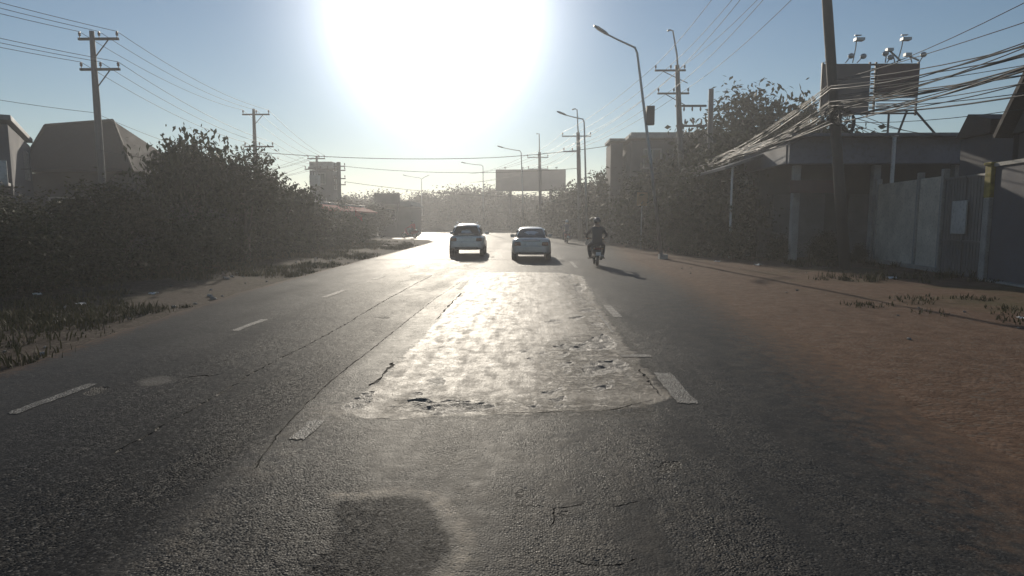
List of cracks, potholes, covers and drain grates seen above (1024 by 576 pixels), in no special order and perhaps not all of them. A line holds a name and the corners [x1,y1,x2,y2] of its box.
crack [366,362,395,388]
pothole [406,397,500,416]
crack [602,369,660,411]
pothole [581,358,630,377]
crack [516,502,588,525]
